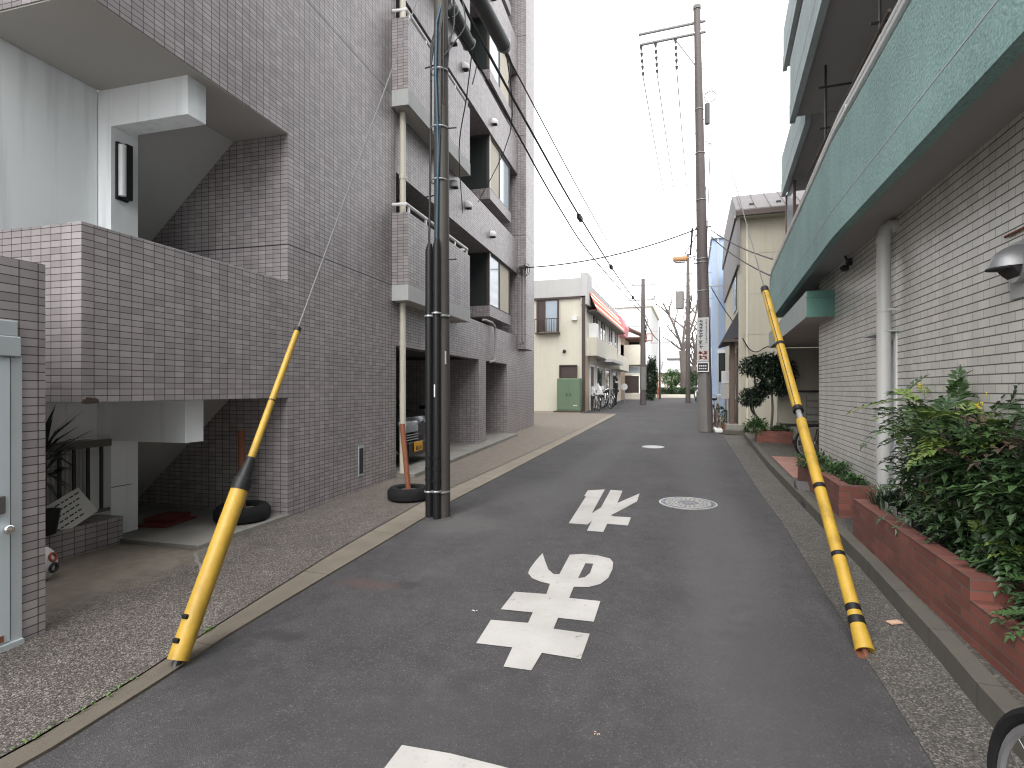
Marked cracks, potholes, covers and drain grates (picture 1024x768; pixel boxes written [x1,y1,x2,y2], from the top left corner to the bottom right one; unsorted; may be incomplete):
manhole cover [659,497,718,510]
crack [193,552,202,571]
